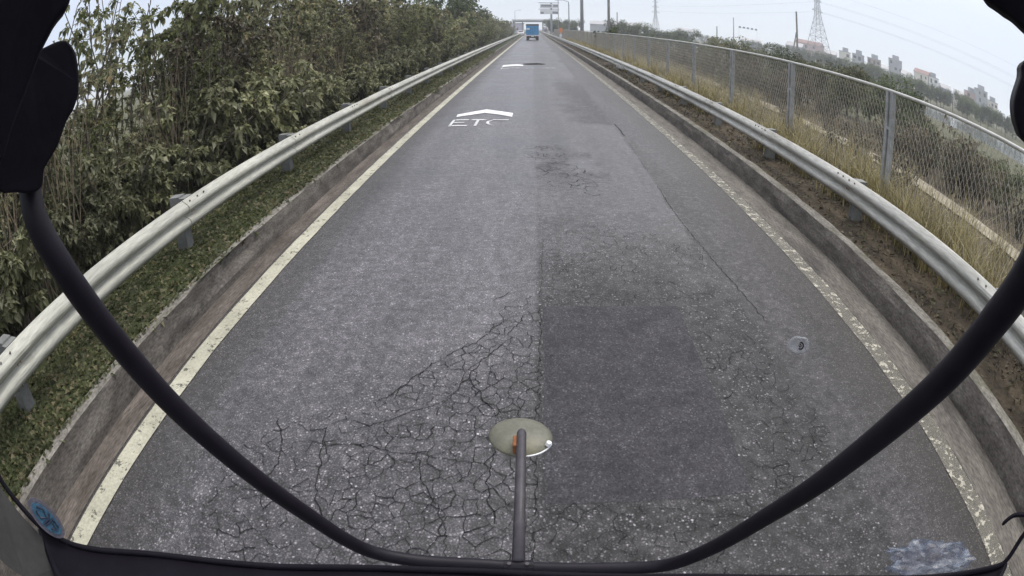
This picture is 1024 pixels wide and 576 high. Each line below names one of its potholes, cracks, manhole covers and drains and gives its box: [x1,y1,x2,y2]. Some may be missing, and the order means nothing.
crack [688,310,833,498]
crack [544,125,764,319]
crack [202,268,542,566]
crack [528,143,604,196]
